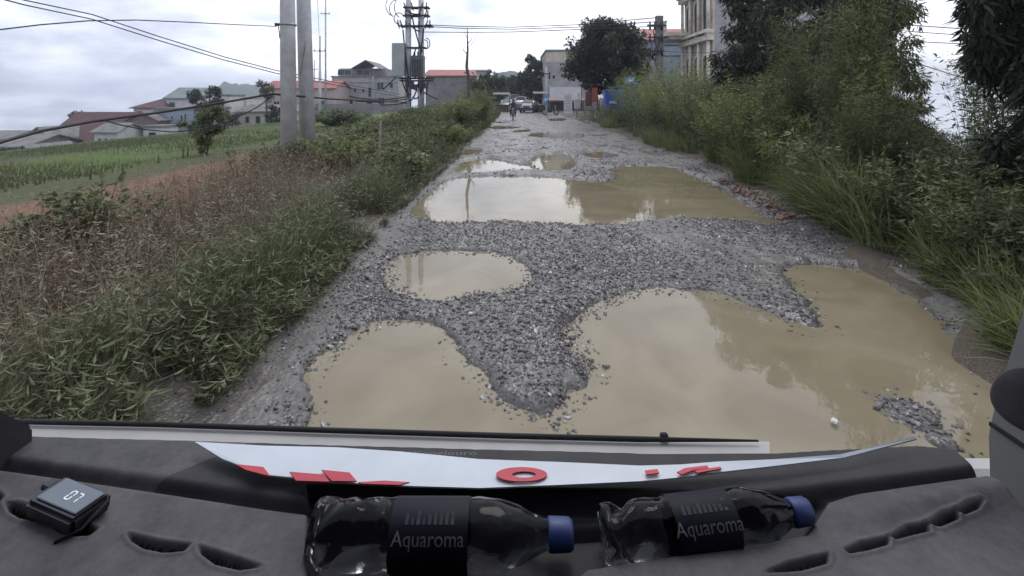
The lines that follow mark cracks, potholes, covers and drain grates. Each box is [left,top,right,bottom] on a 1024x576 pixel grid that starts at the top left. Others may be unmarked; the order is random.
pothole [582,149,621,159]
pothole [405,164,787,226]
pothole [379,248,536,302]
pothole [544,260,999,458]
pothole [300,314,554,434]
pothole [526,152,578,171]
pothole [451,156,533,173]
